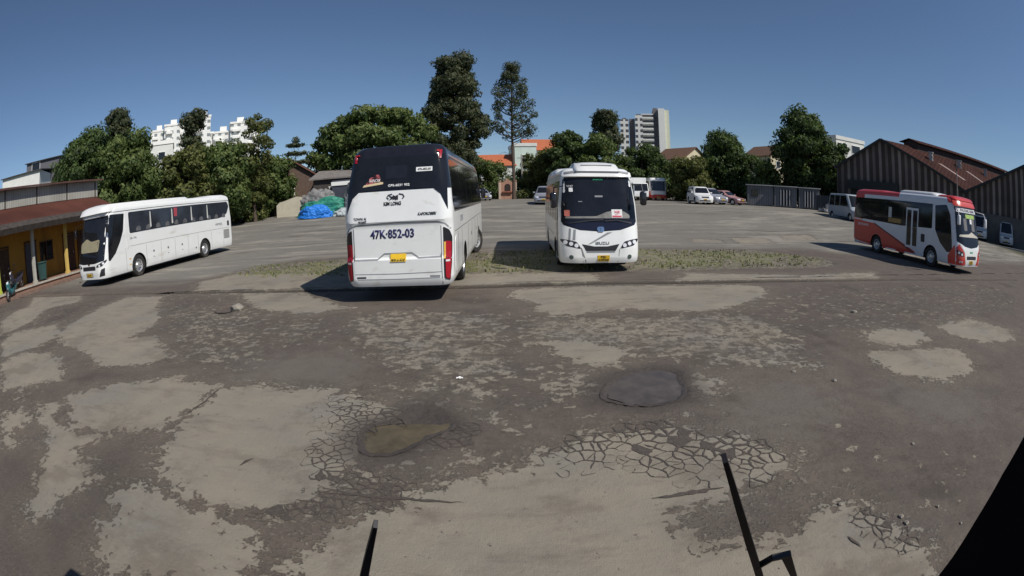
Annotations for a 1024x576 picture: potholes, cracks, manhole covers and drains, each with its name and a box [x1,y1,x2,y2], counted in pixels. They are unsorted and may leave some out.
crack [245,395,459,523]
crack [541,419,786,498]
crack [848,506,920,555]
crack [424,422,482,448]
pothole [356,405,458,456]
